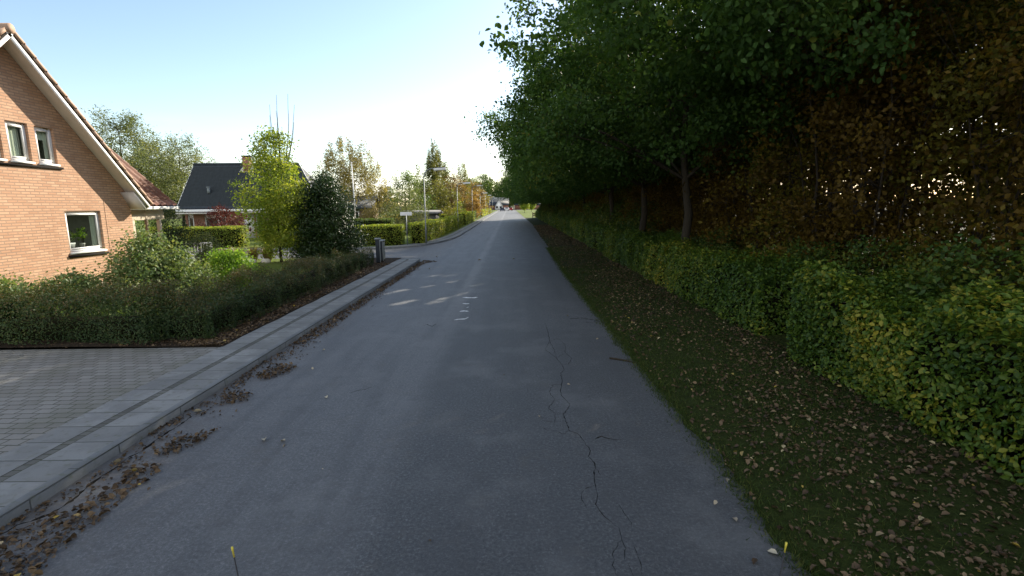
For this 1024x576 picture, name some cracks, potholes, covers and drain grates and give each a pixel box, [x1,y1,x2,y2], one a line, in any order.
crack [542,327,642,575]
